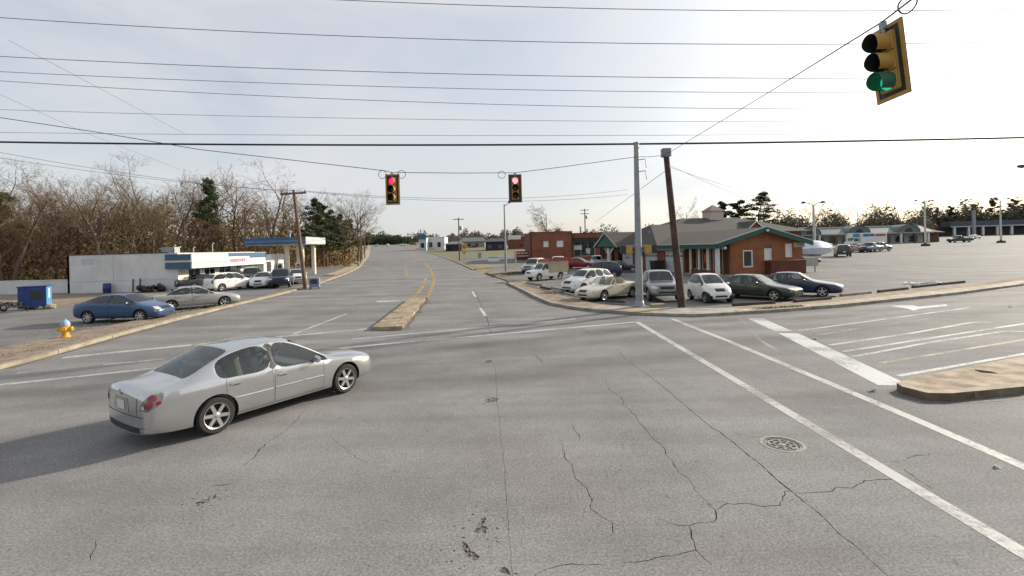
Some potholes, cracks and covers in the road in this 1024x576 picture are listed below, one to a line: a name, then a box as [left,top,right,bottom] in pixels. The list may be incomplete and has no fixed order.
manhole cover [759,436,807,453]
crack [605,381,930,563]
crack [562,424,613,532]
